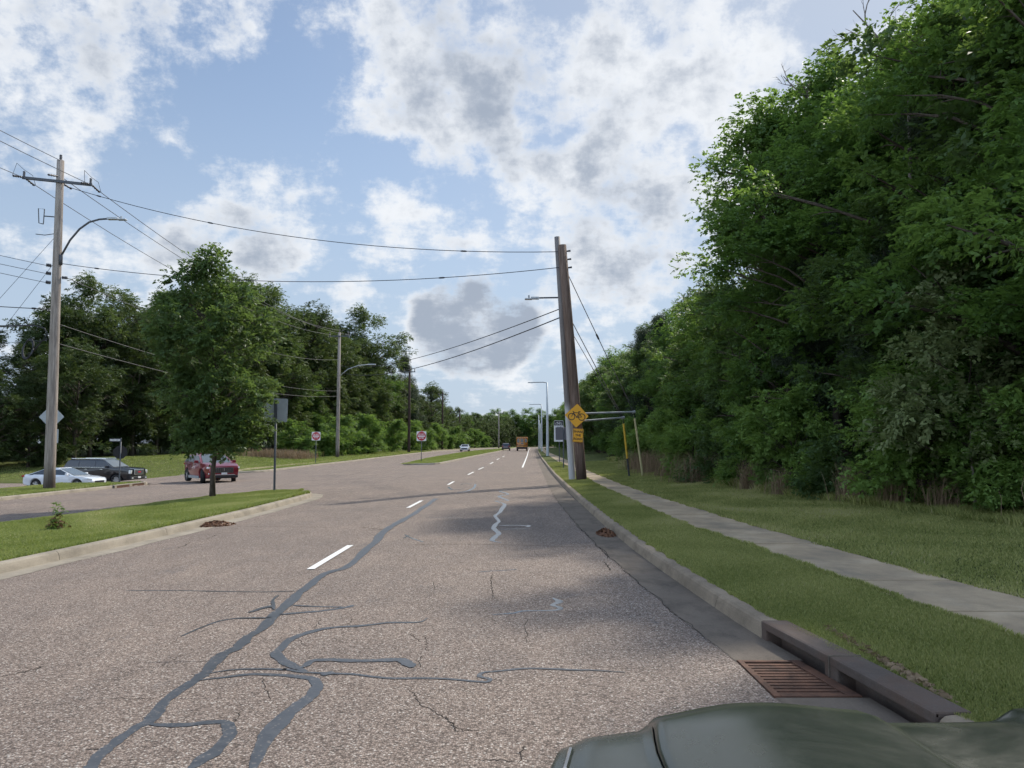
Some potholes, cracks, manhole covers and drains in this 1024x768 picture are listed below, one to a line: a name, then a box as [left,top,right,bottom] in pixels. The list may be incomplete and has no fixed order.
crack [409,635,495,732]
